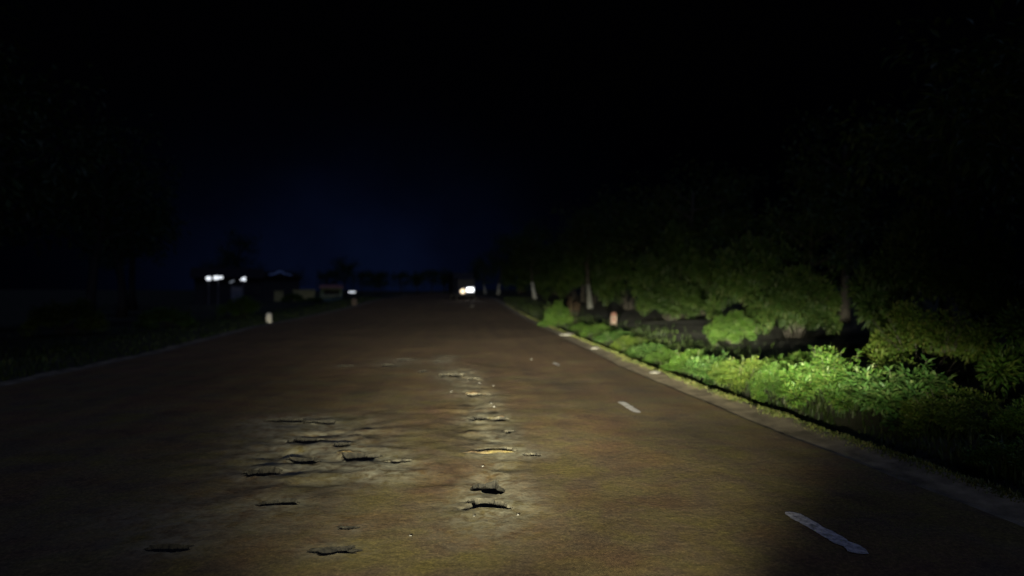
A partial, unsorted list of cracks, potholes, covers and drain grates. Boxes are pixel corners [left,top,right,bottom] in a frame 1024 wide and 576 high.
pothole [337,450,382,462]
pothole [143,544,194,553]
pothole [241,466,283,478]
pothole [307,545,363,556]
pothole [461,498,513,510]
pothole [470,480,505,494]
pothole [255,498,300,506]
